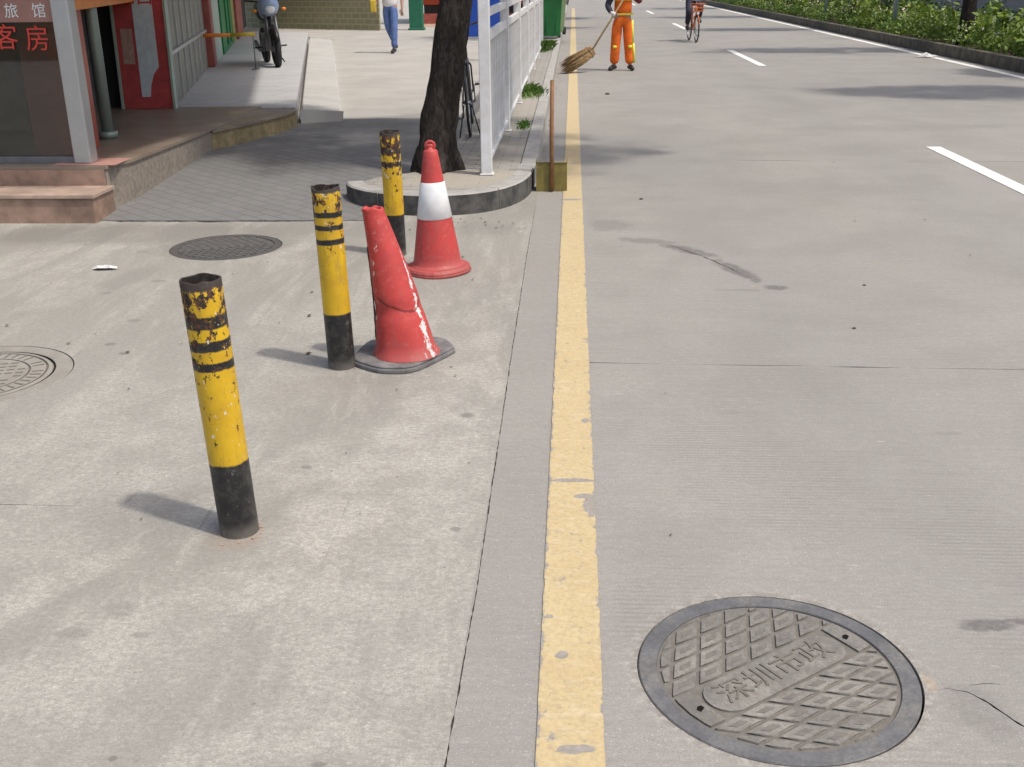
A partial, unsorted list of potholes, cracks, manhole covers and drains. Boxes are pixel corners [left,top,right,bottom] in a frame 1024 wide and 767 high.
crack [956,683,1024,727]
manhole cover [170,235,282,261]
manhole cover [638,597,922,767]
manhole cover [0,346,74,402]
